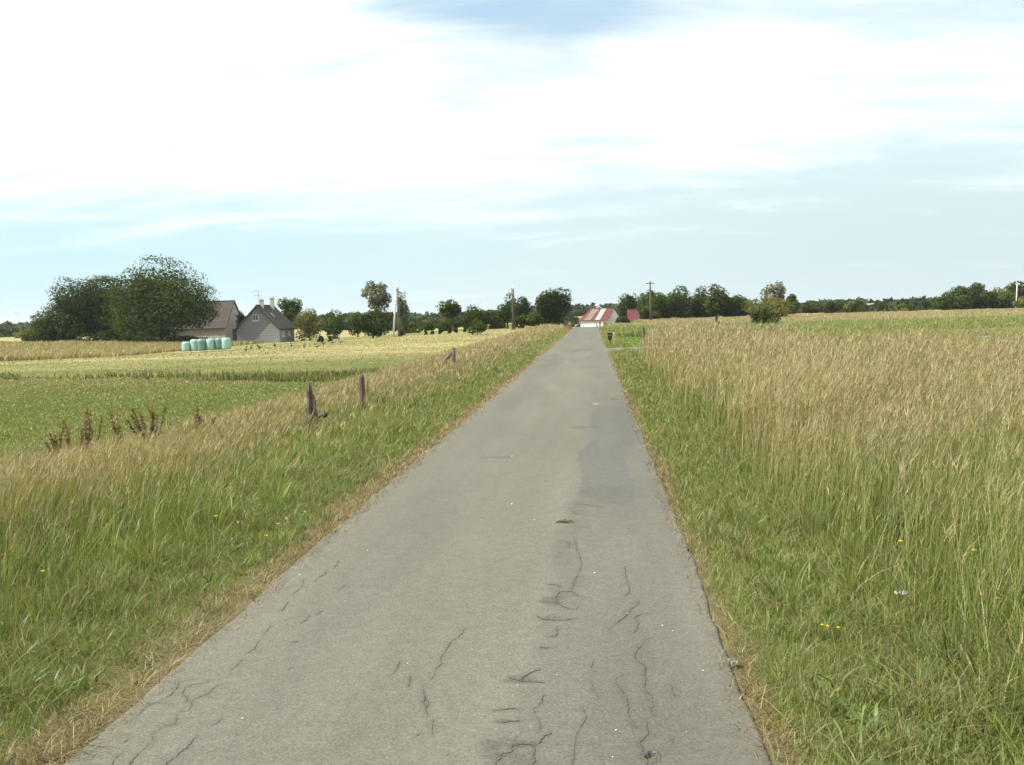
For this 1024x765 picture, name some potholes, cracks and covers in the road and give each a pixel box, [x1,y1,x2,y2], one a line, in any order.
crack [537,542,583,648]
crack [495,668,551,765]
crack [393,628,465,735]
crack [572,570,655,765]
crack [112,560,346,765]
